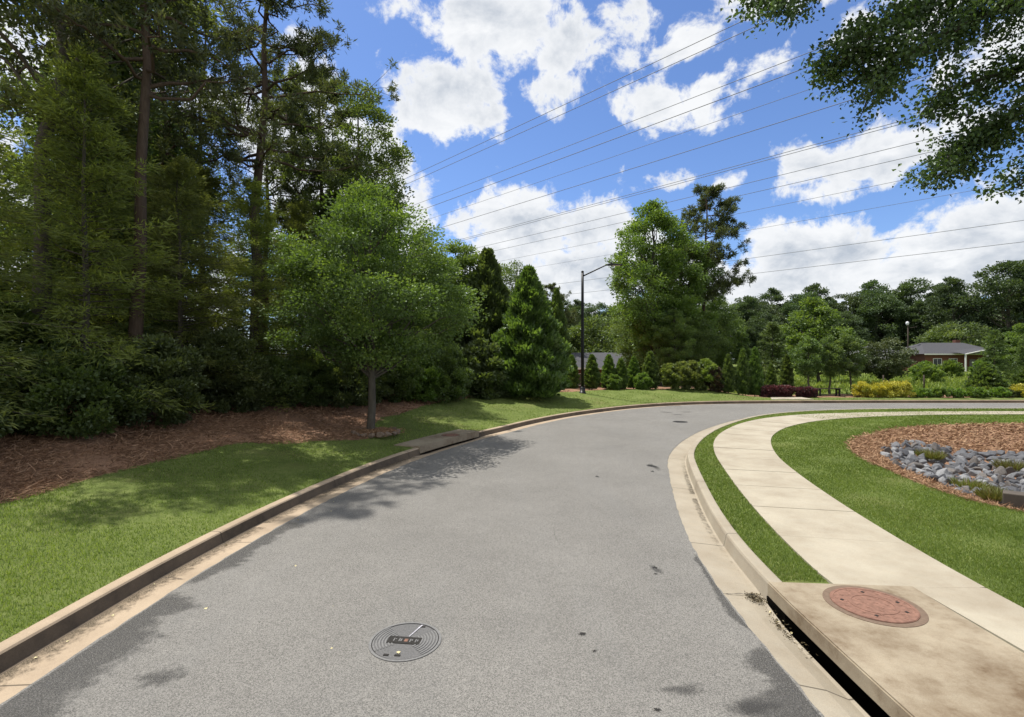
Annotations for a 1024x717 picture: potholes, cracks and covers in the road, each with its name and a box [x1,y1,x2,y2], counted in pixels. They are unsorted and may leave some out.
manhole cover [822,585,929,628]
manhole cover [368,622,442,662]
